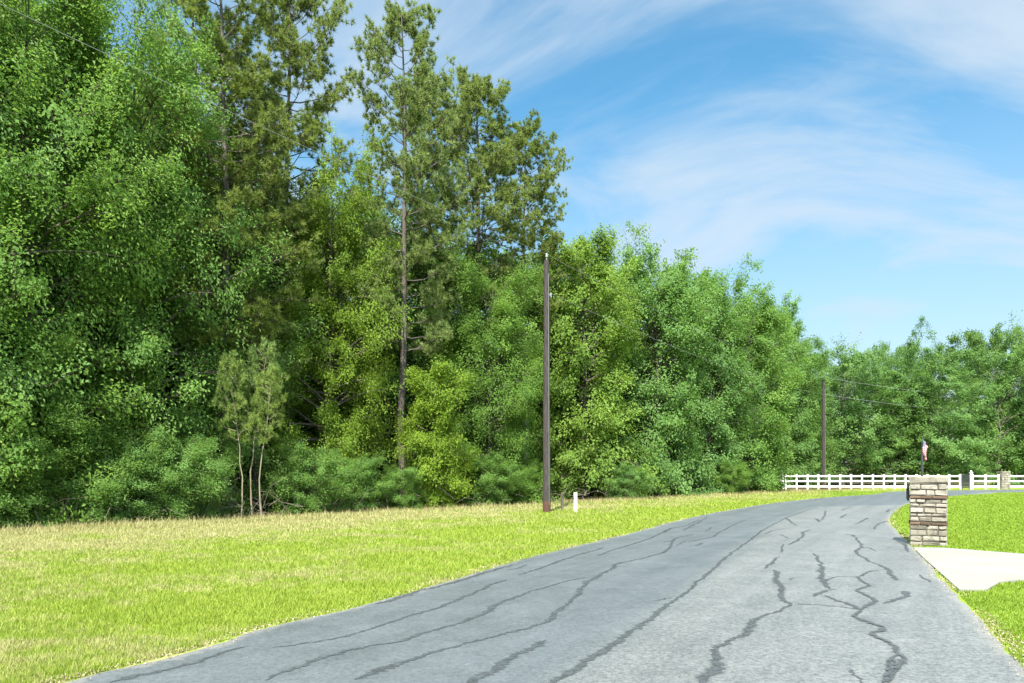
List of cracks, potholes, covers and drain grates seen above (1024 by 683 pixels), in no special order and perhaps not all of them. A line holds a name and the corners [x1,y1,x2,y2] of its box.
crack [817,507,889,529]
crack [374,564,527,604]
